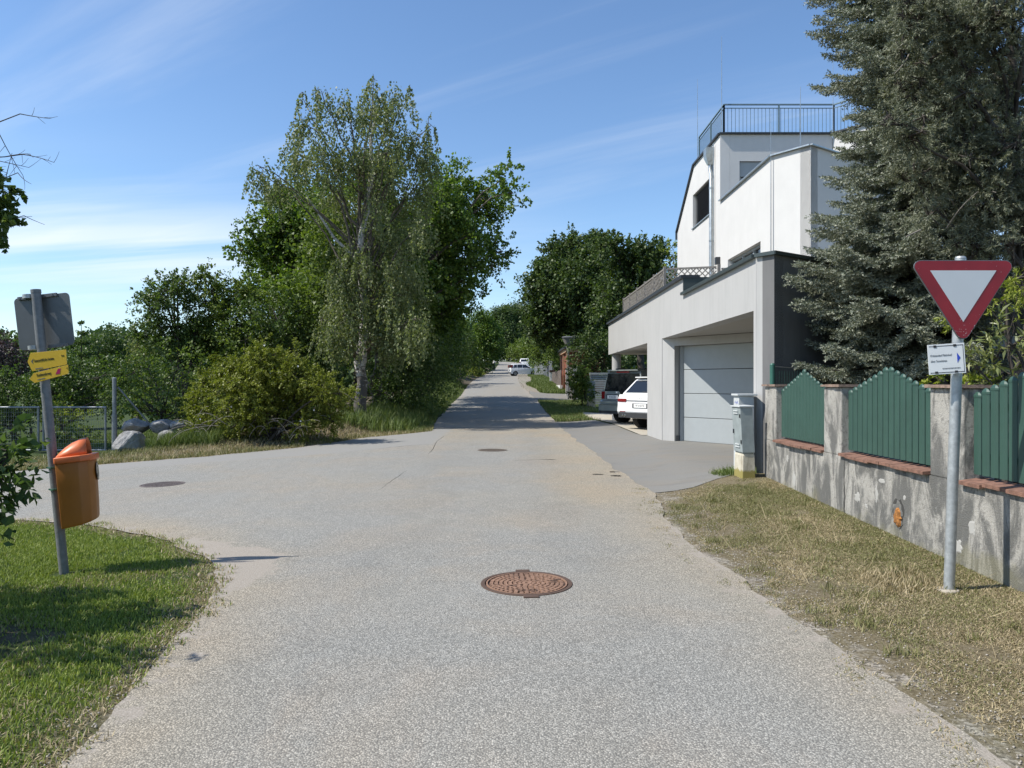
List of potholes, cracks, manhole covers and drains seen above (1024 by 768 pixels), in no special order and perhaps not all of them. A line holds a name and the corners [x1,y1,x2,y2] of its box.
manhole cover [481,569,573,598]
